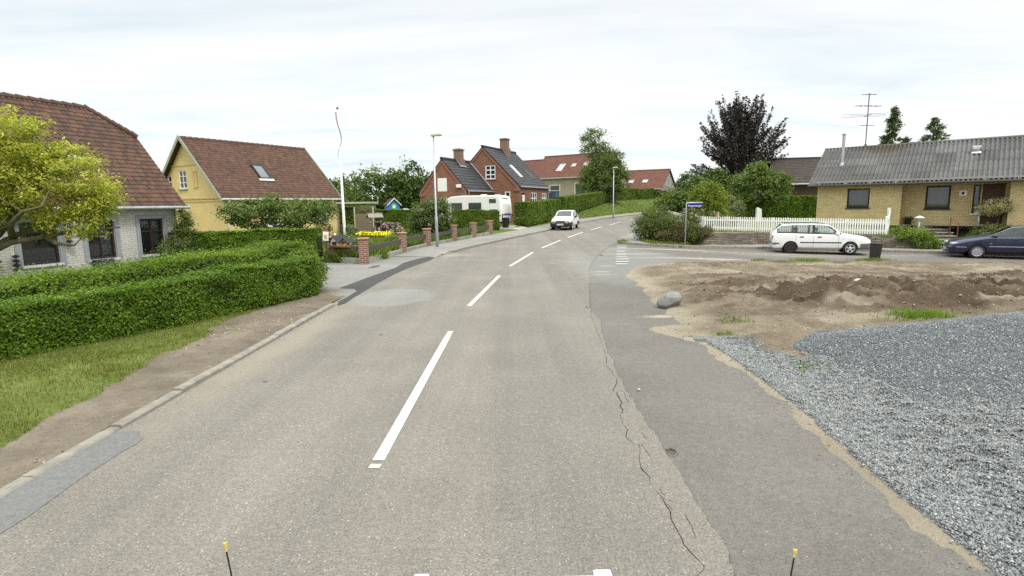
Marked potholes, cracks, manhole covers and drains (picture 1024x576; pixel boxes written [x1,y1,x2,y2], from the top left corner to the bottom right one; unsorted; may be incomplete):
crack [589,293,704,575]
